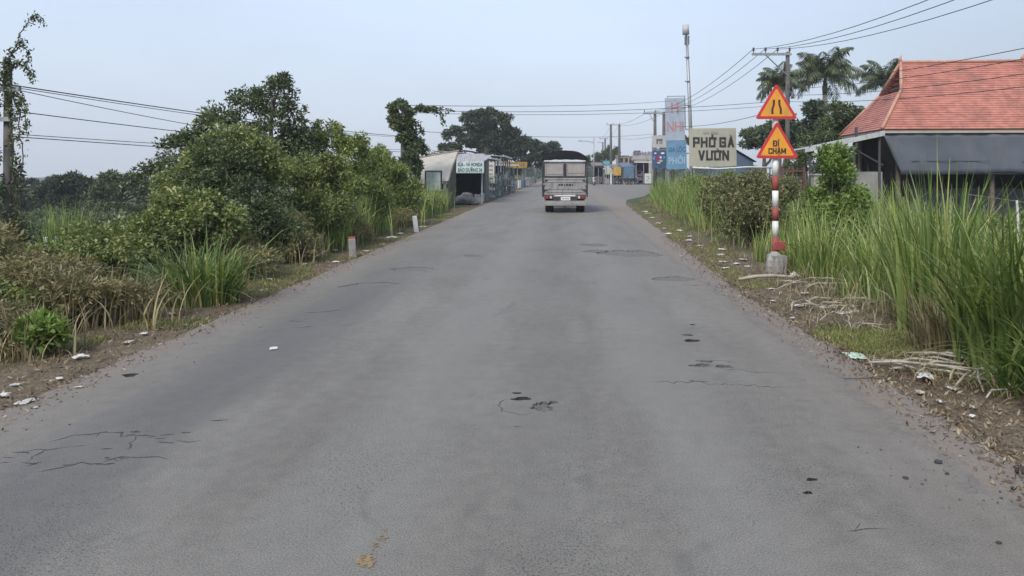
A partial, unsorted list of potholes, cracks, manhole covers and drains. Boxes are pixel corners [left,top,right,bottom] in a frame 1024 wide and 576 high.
crack [1,419,229,472]
crack [662,360,783,388]
pothole [530,401,558,413]
pothole [688,360,734,368]
